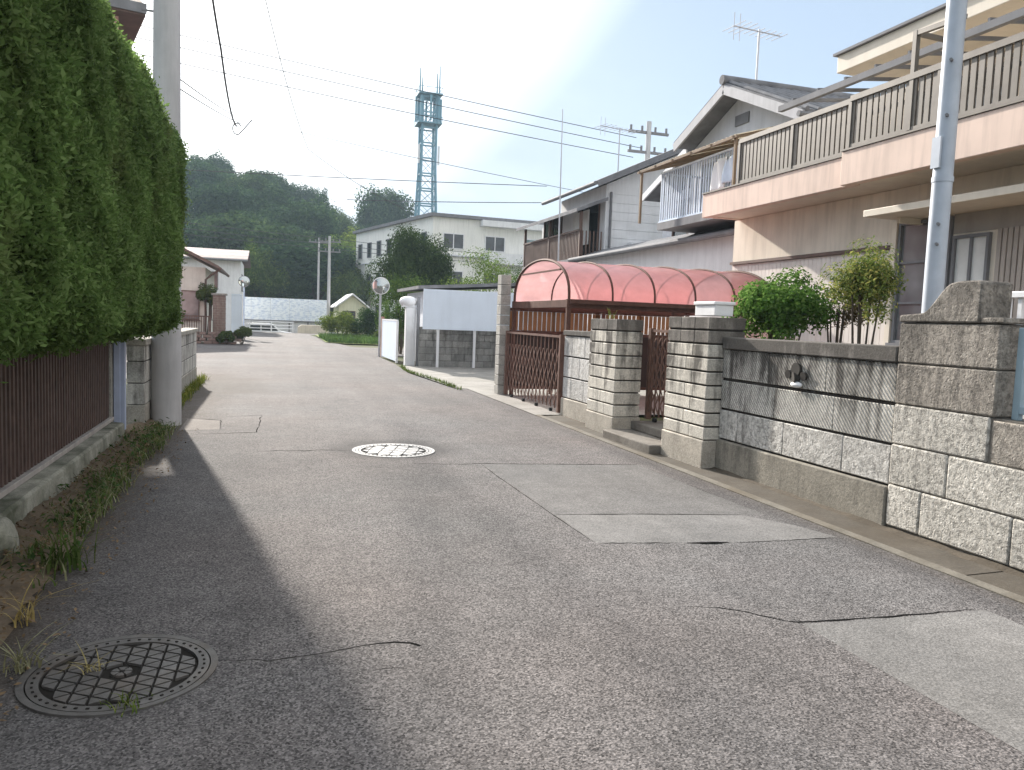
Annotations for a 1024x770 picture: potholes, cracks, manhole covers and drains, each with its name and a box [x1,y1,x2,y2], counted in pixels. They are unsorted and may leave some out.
manhole cover [15,634,218,718]
crack [238,641,421,661]
manhole cover [352,443,435,458]
crack [705,607,972,623]
